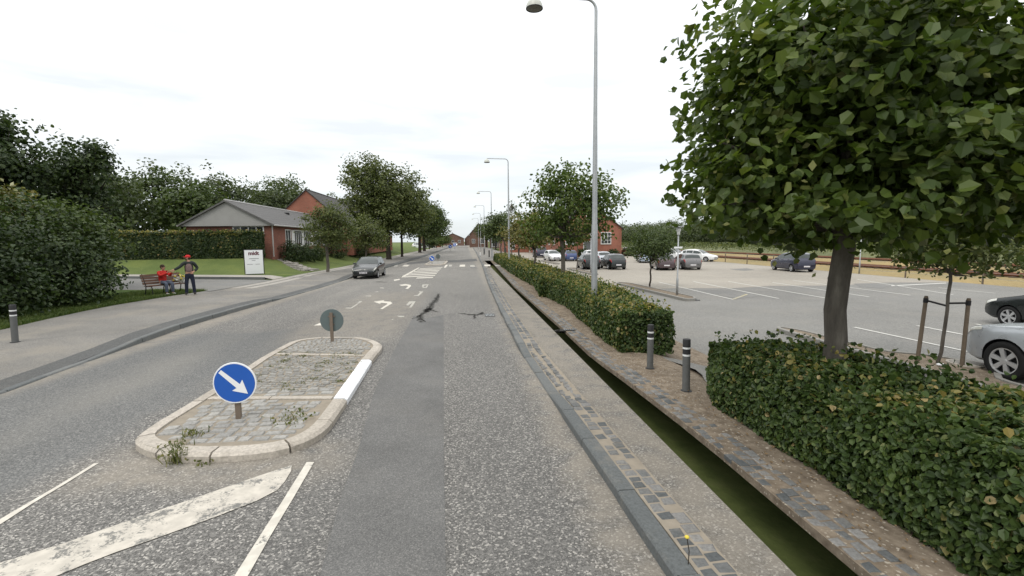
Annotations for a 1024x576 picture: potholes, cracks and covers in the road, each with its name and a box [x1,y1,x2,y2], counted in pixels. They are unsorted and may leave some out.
crack [412,294,440,322]
